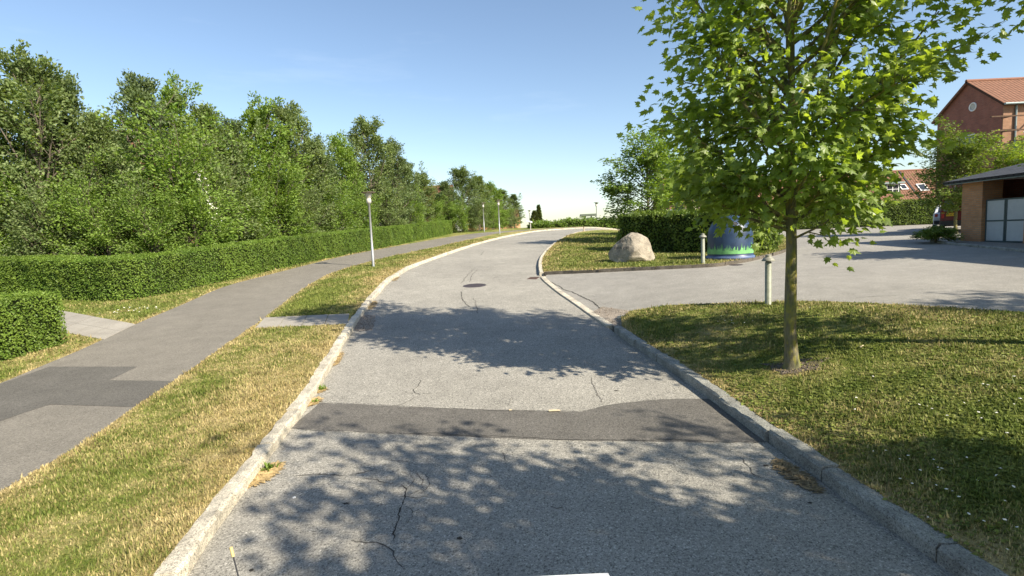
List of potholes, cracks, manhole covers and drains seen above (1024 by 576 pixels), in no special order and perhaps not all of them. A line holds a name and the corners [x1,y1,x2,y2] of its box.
crack [299,460,430,569]
